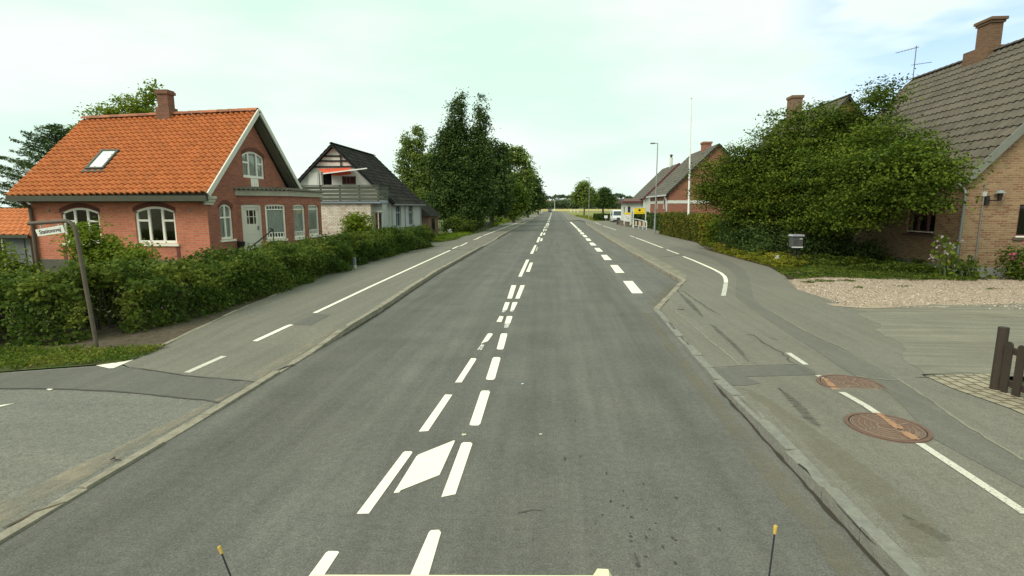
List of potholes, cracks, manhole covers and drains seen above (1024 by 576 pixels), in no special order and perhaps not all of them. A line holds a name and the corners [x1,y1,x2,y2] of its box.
manhole cover [844,412,933,443]
manhole cover [816,374,887,390]
